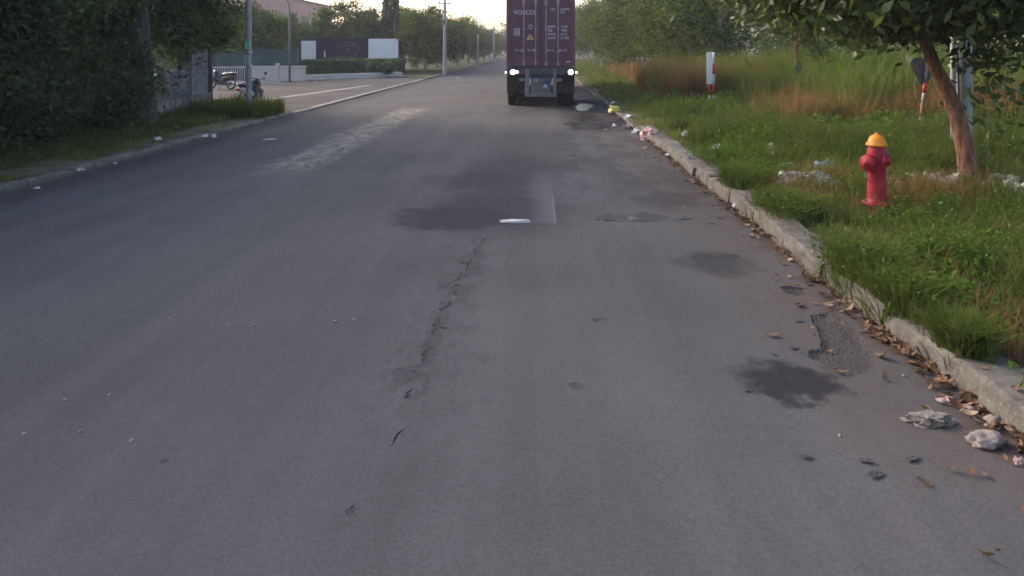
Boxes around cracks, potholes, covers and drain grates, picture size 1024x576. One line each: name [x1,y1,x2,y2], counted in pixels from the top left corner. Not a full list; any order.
pothole [779,286,806,296]
crack [390,235,490,448]
